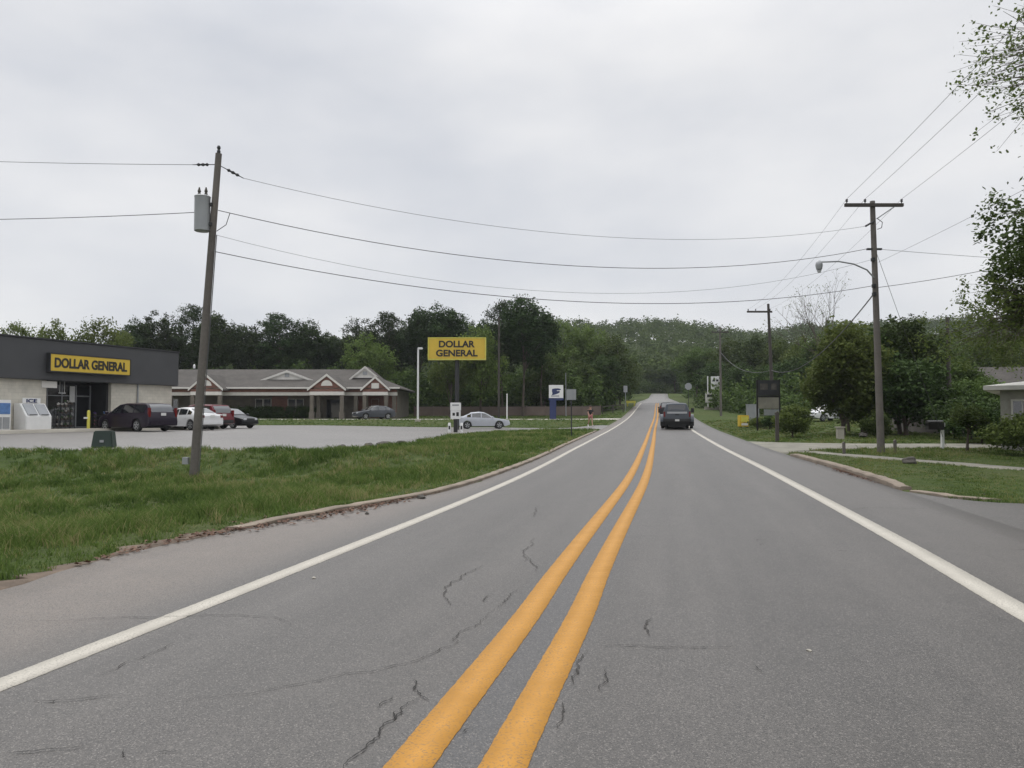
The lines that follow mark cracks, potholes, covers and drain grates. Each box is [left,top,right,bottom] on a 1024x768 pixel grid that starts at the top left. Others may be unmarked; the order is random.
crack [170,591,514,768]
crack [605,617,730,647]
crack [556,653,585,728]
